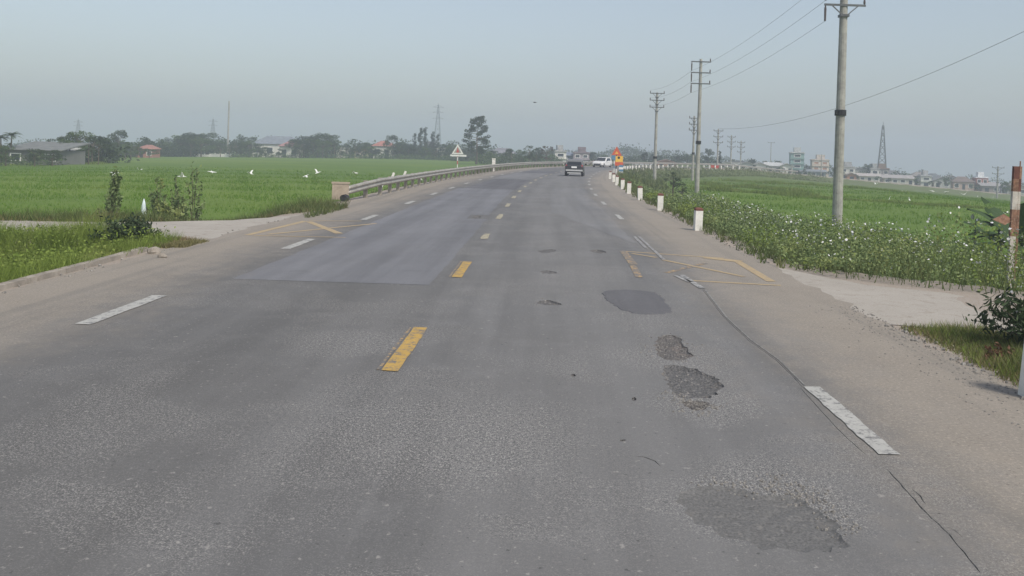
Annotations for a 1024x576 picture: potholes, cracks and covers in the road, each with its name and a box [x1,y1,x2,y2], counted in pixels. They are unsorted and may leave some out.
pothole [657,365,724,417]
crack [890,472,979,571]
pothole [640,332,705,362]
